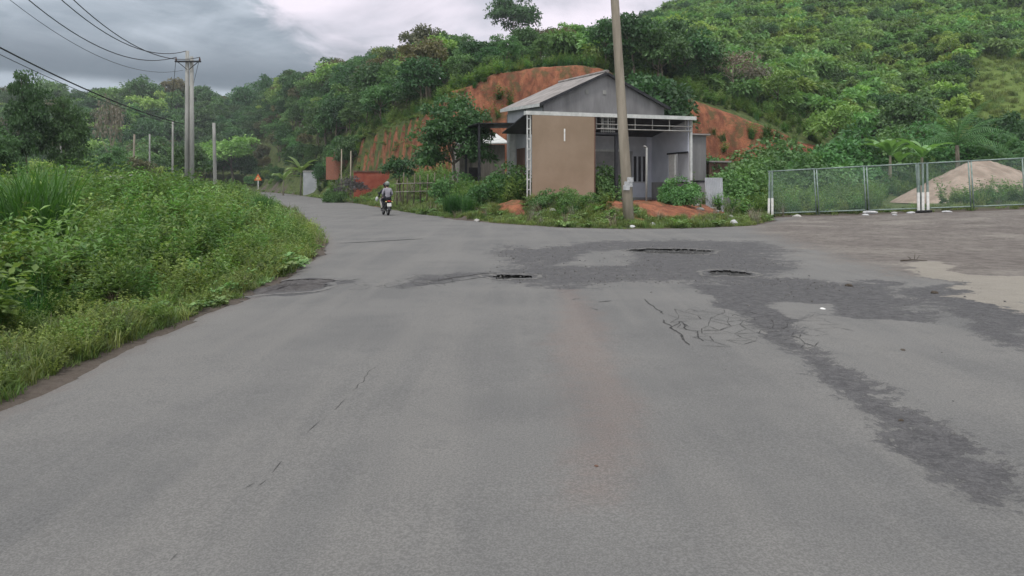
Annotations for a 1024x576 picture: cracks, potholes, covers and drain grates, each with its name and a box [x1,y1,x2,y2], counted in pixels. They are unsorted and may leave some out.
pothole [695,269,763,278]
crack [645,299,849,348]
pothole [244,277,348,297]
